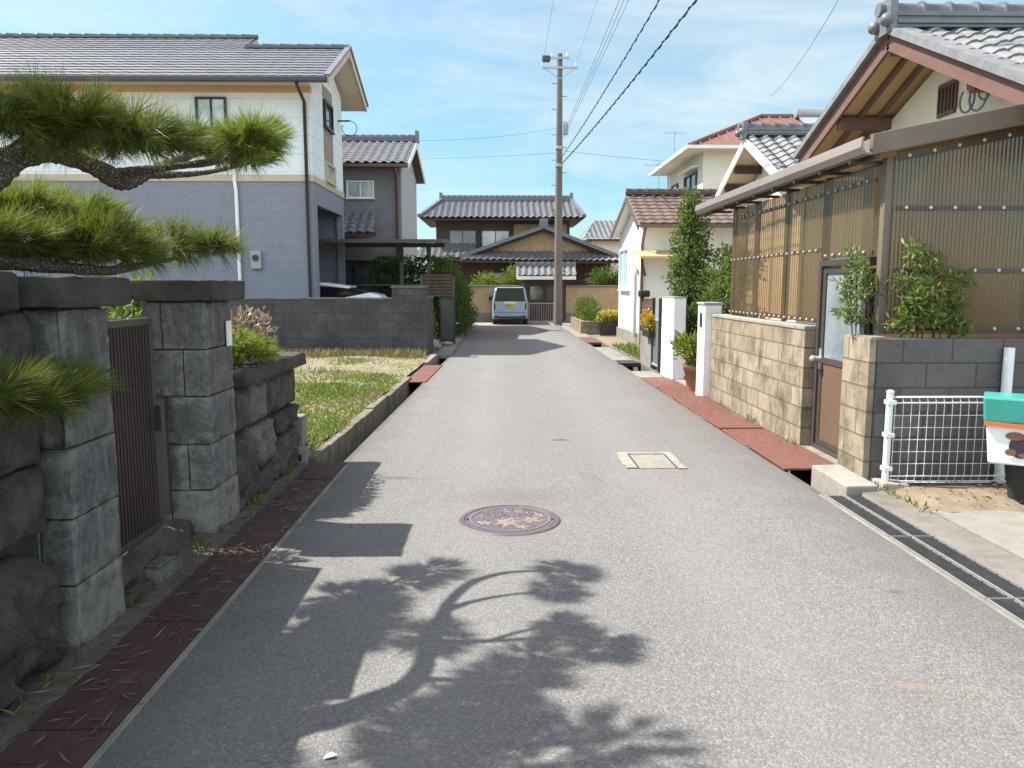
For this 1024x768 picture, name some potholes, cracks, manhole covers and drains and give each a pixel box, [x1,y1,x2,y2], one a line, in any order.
drain grate [889,536,1024,601]
manhole cover [616,452,687,469]
manhole cover [459,505,561,536]
drain grate [986,598,1024,625]
drain grate [824,494,935,539]
